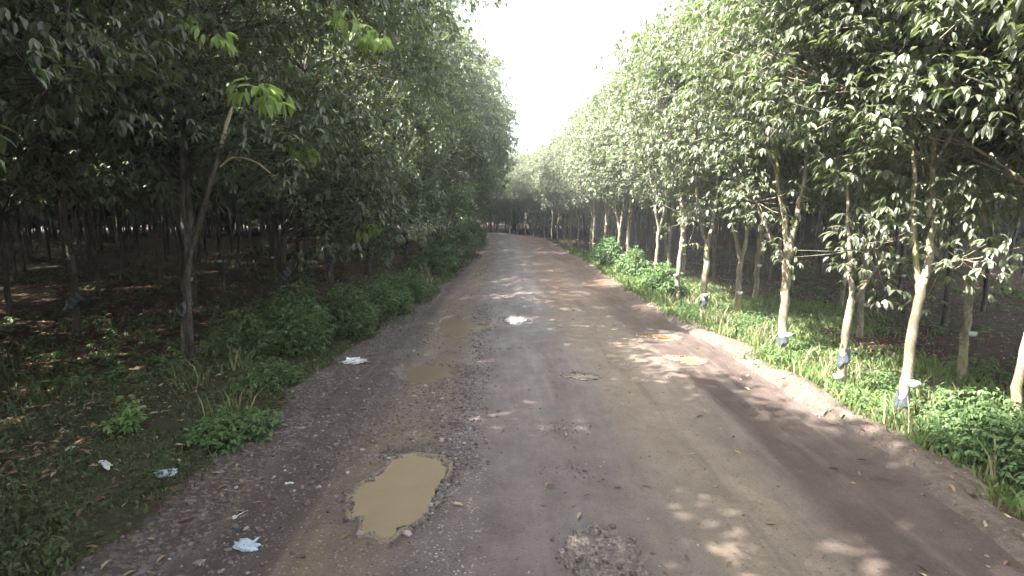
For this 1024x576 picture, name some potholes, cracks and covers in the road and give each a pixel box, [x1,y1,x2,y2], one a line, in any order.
pothole [550,521,660,576]
pothole [558,369,602,381]
pothole [389,362,465,386]
pothole [498,315,531,324]
pothole [335,448,461,547]
pothole [425,314,494,338]
